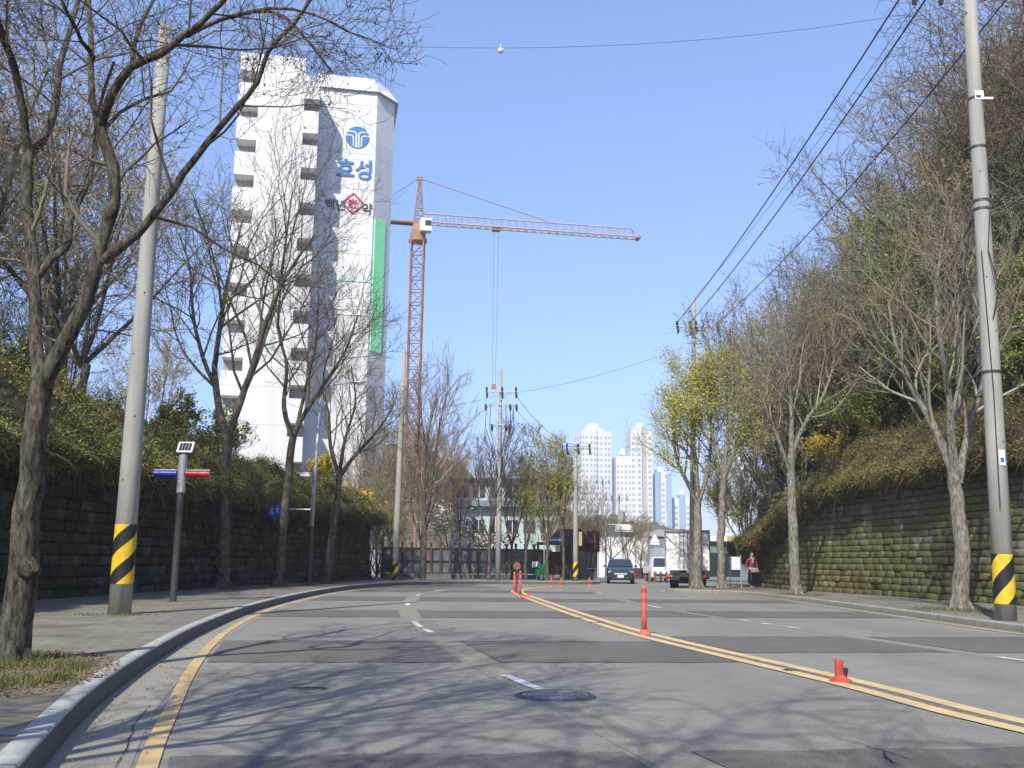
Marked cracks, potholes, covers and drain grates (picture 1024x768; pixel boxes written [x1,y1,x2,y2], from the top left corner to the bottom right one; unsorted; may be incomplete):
crack [834,736,910,767]
manhole cover [514,690,597,702]
crack [115,705,150,767]
